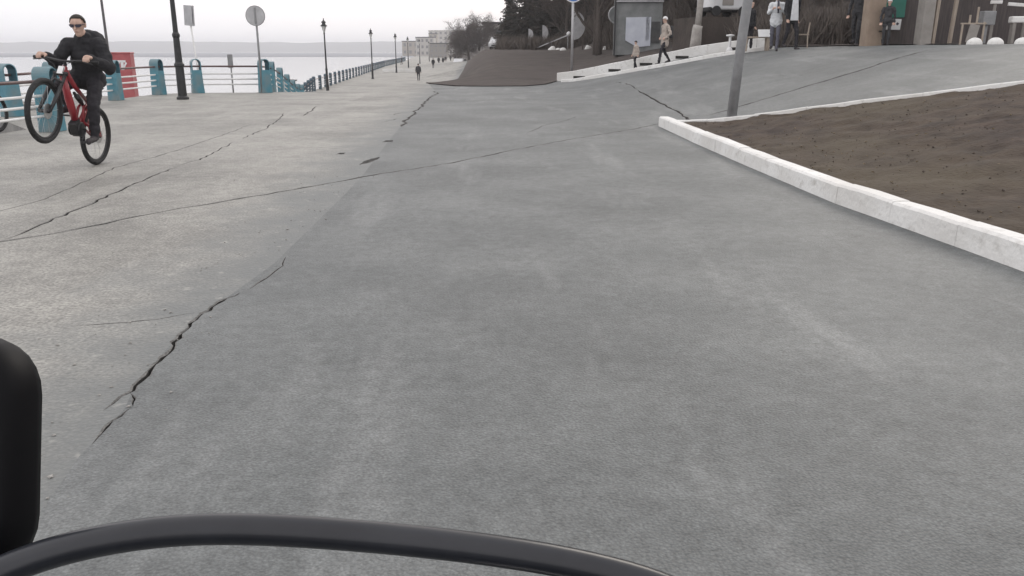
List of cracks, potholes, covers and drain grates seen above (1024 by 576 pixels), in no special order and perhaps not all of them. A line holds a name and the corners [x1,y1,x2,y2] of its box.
crack [0,48,939,242]
crack [93,257,286,443]
